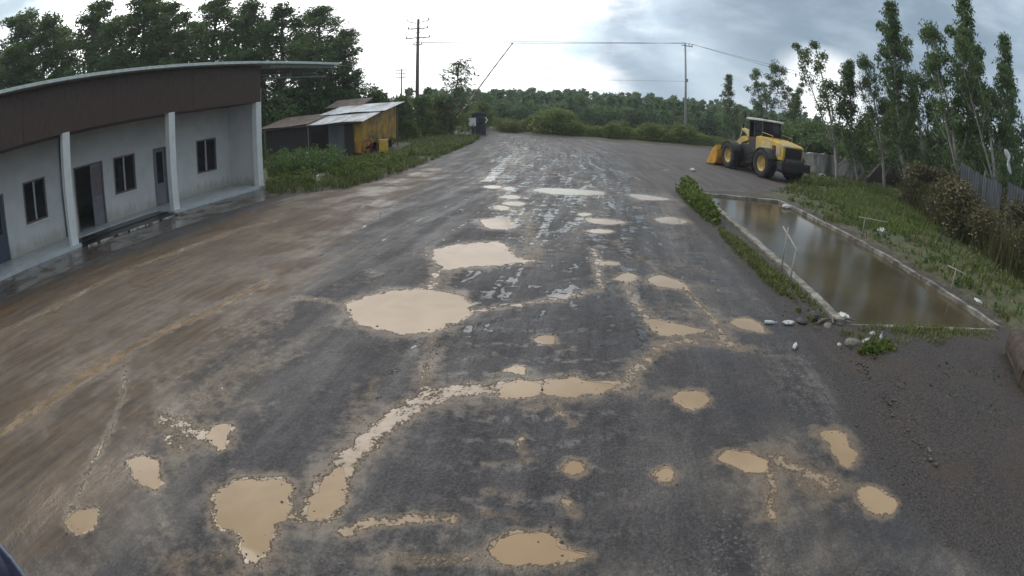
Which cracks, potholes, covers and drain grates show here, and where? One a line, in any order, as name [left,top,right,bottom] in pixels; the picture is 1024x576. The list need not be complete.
pothole [564,460,585,475]
pothole [65,508,98,535]
pothole [302,466,347,518]
pothole [540,375,615,397]
pothole [205,423,233,455]
pothole [648,275,688,291]
pothole [484,525,586,566]
pothole [214,478,296,563]
pothole [853,482,898,514]
pothole [499,377,543,401]
pothole [346,288,472,335]
pothole [128,455,161,489]
